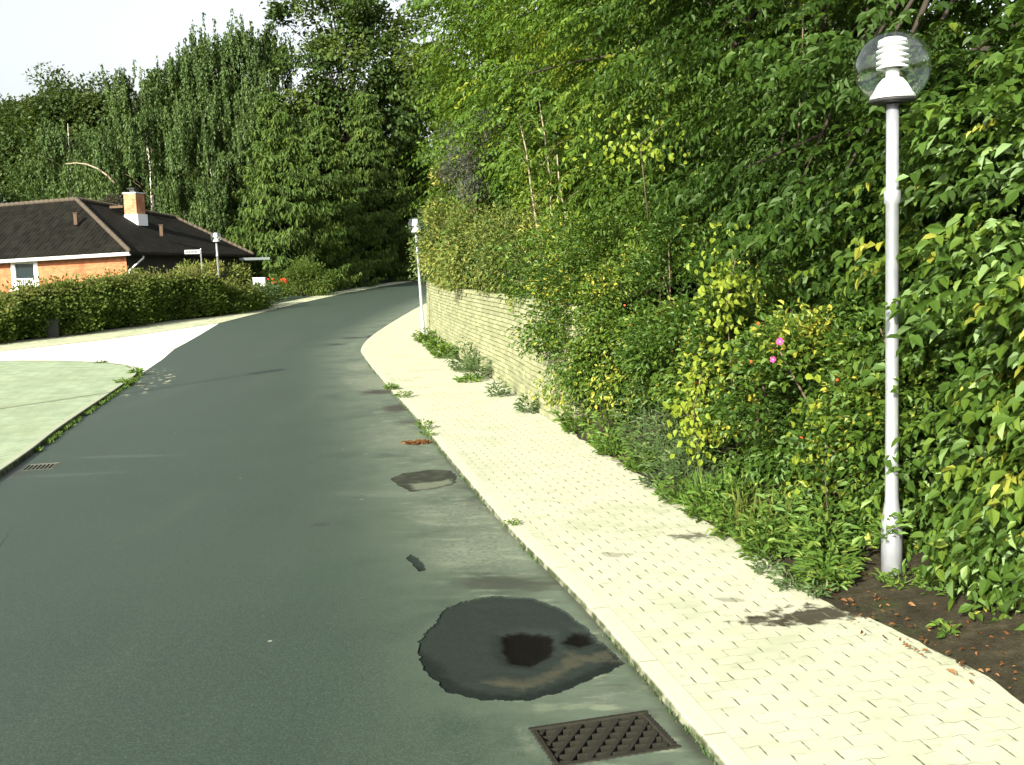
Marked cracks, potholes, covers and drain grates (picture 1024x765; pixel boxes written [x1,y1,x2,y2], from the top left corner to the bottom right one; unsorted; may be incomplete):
pothole [406,554,426,572]
pothole [391,469,457,492]
drain grate [528,710,682,765]
pothole [417,596,625,701]
drain grate [20,462,61,471]
